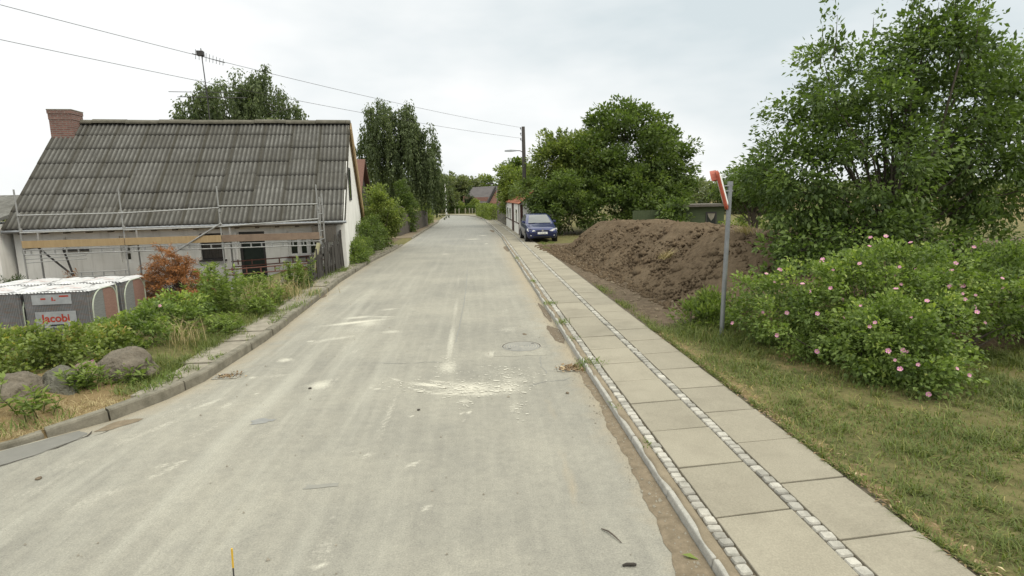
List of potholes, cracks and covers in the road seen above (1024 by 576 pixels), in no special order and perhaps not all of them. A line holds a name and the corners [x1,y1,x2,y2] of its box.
manhole cover [501,341,542,352]
